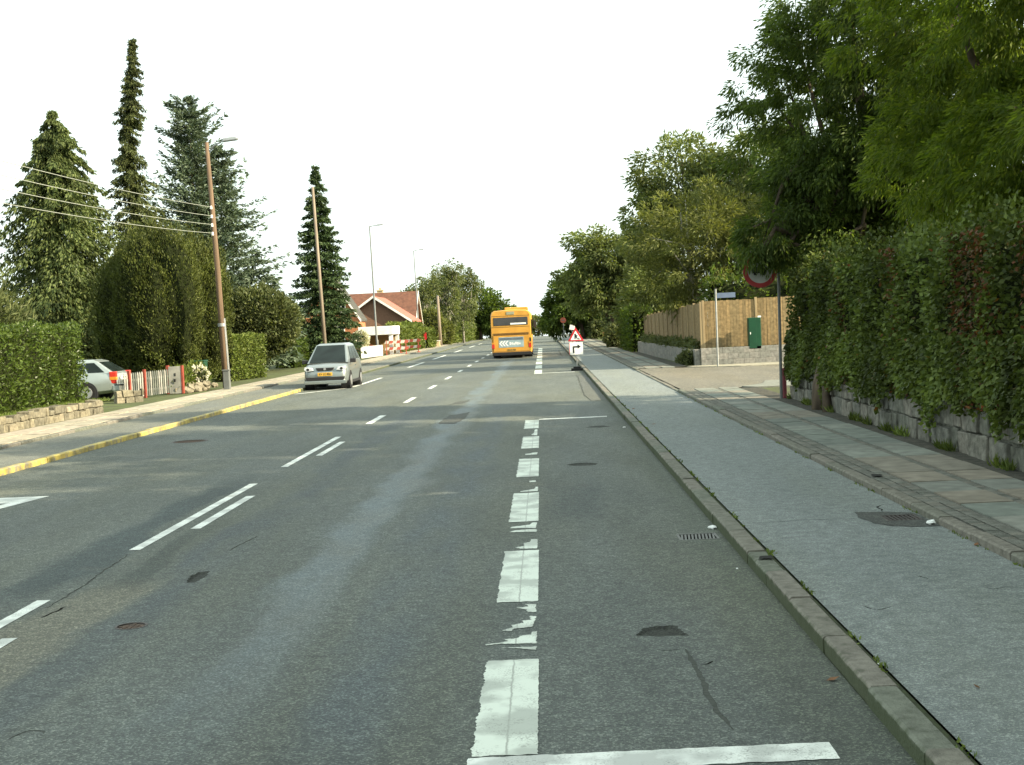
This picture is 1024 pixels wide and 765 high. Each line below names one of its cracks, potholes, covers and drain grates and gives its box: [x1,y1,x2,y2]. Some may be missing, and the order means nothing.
manhole cover [114,622,148,630]
crack [41,554,128,618]
crack [662,649,734,730]
pothole [636,625,689,637]
pothole [186,571,210,583]
